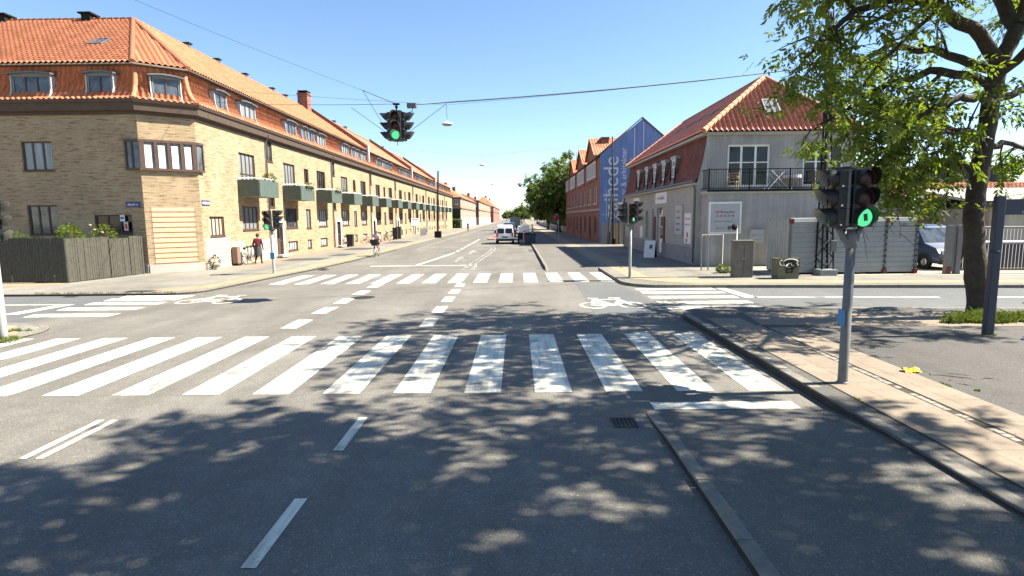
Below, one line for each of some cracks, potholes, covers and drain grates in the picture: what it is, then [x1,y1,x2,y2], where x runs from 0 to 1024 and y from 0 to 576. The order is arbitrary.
drain grate [610,417,639,428]
